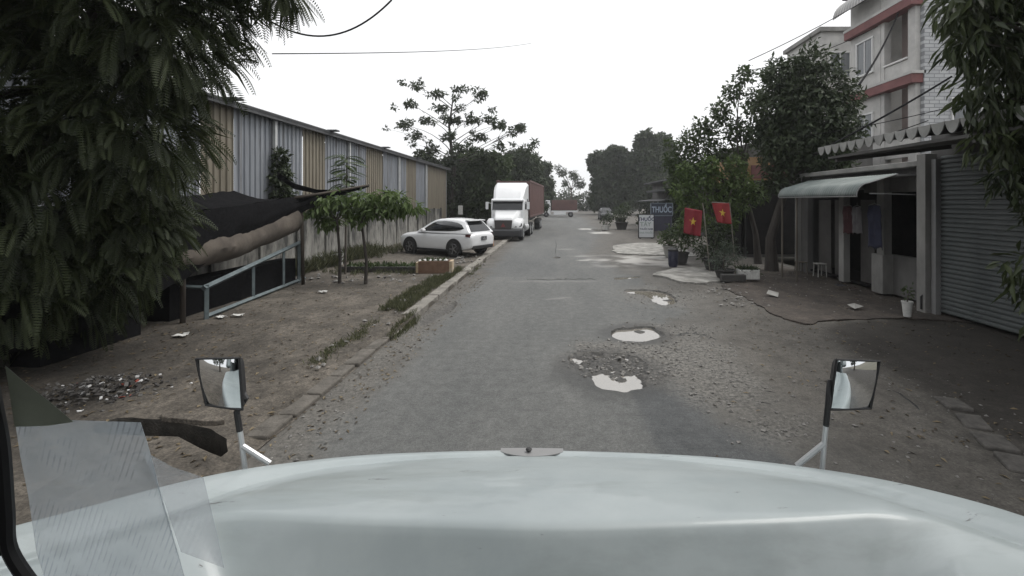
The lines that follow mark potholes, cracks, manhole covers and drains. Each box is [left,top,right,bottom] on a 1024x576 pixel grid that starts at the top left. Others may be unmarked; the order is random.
pothole [568,352,648,392]
pothole [611,326,665,342]
pothole [624,289,677,305]
